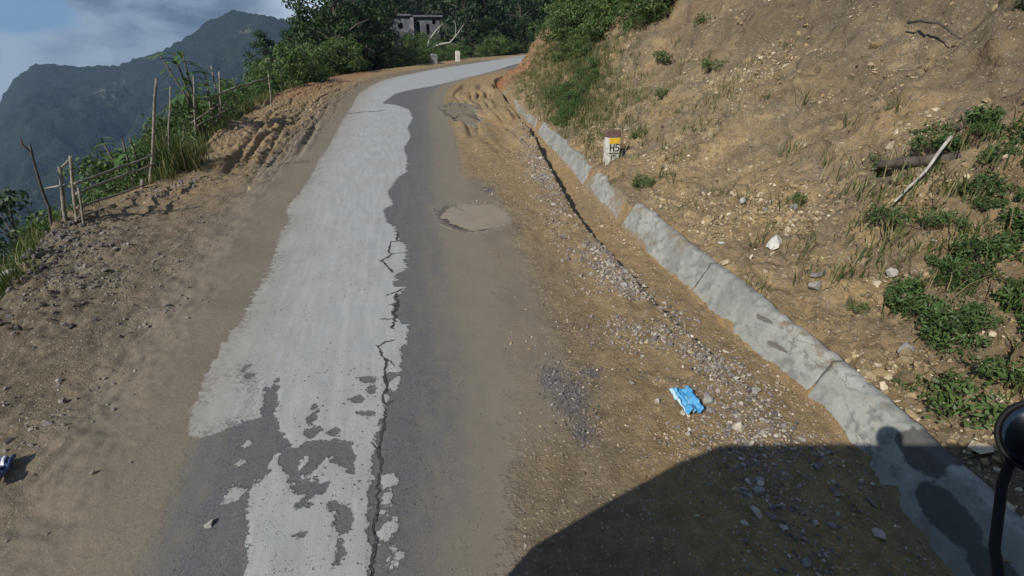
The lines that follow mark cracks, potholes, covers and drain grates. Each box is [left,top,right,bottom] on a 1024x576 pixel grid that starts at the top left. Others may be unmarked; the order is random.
crack [368,232,401,576]
